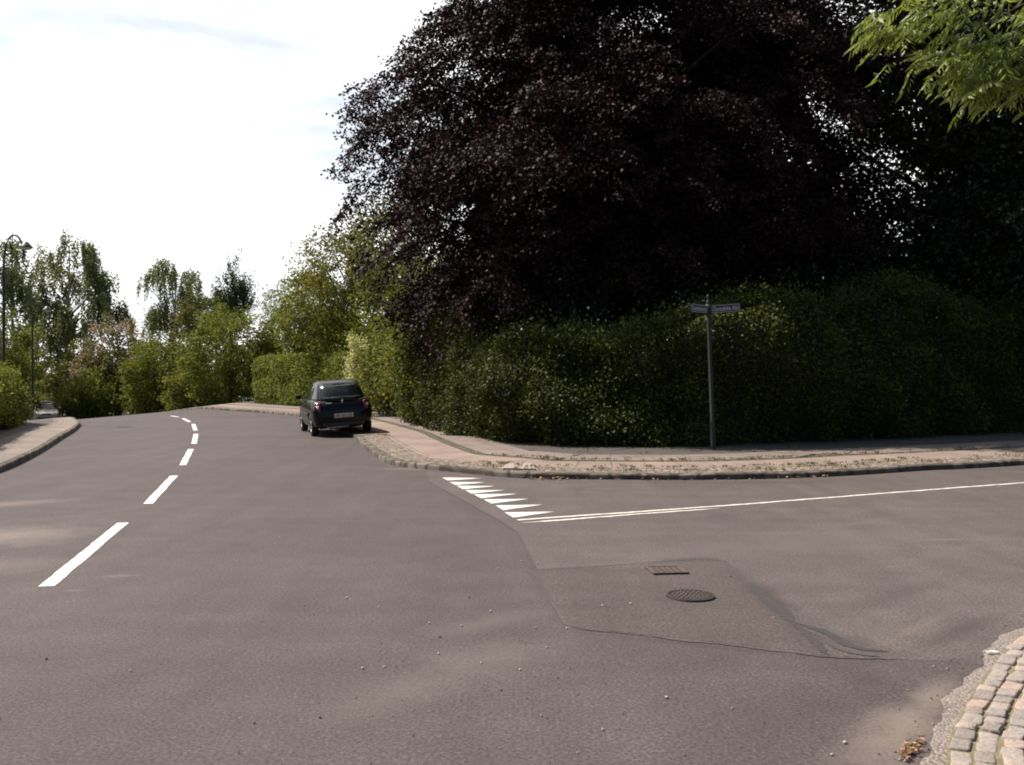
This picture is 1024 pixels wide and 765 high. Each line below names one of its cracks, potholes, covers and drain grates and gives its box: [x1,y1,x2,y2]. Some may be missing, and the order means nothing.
manhole cover [666,589,715,603]
